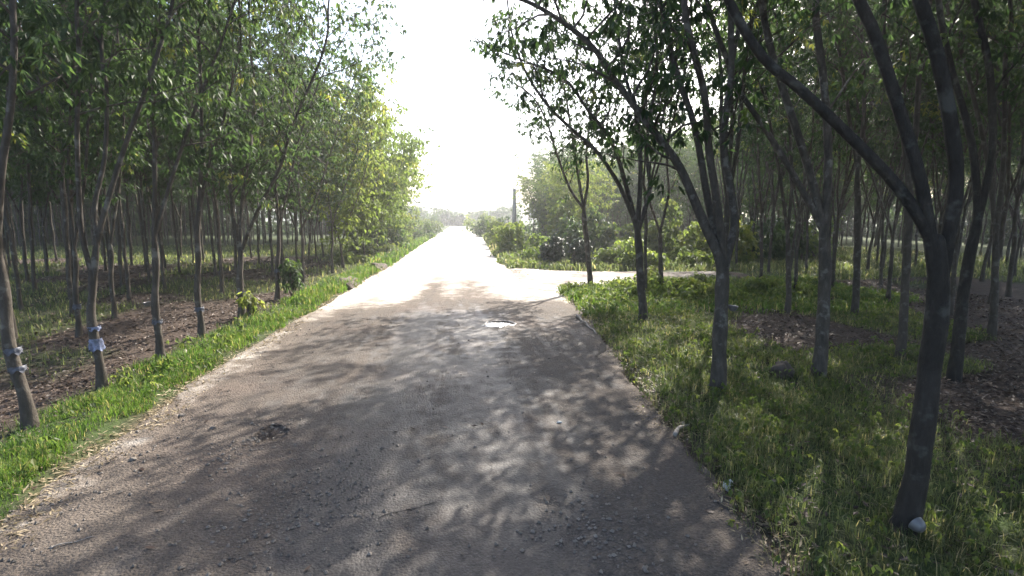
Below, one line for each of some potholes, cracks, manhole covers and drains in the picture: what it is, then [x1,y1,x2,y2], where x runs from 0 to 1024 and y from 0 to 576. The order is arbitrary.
pothole [249,423,292,447]
crack [377,501,437,518]
